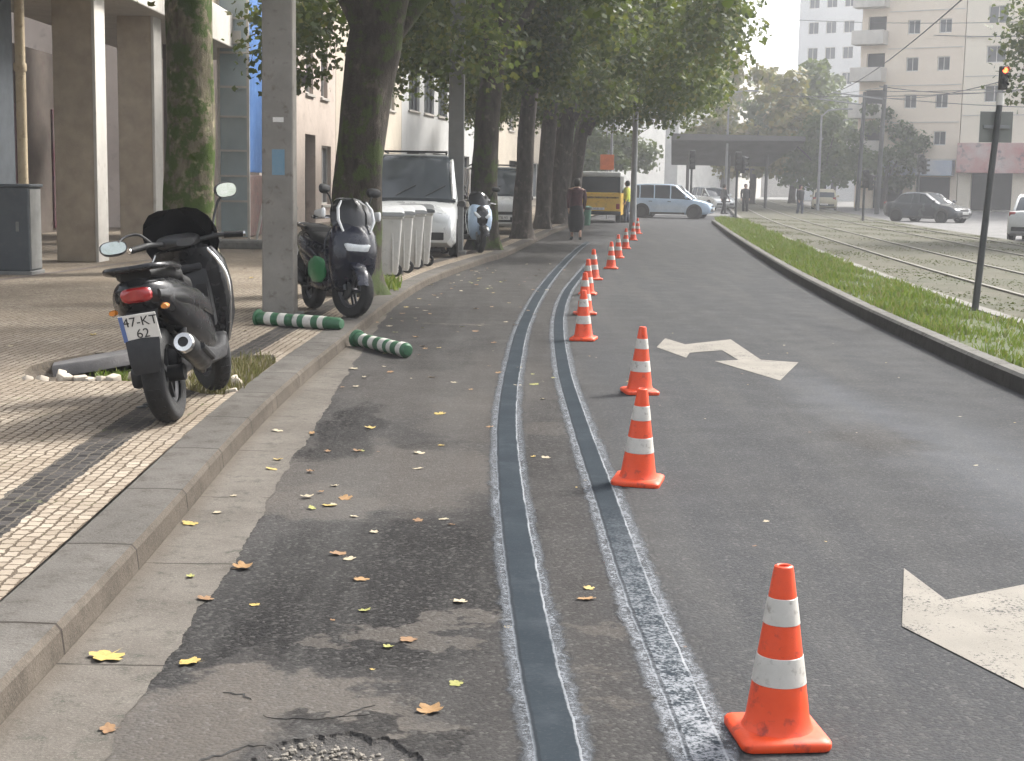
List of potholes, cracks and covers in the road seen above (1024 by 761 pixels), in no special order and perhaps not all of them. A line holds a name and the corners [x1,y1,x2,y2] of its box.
pothole [248,731,424,761]
crack [265,705,375,720]
